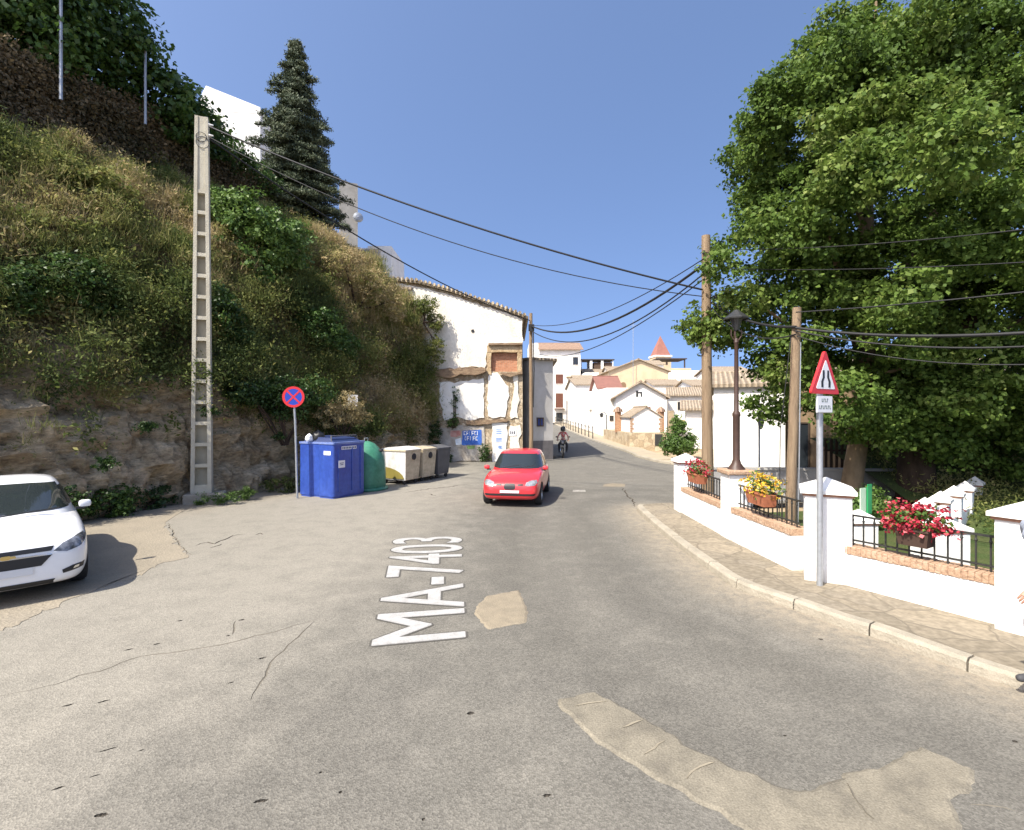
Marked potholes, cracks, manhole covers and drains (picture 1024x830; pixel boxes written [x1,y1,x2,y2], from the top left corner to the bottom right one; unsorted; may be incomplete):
crack [4,618,320,699]
crack [168,523,263,554]
